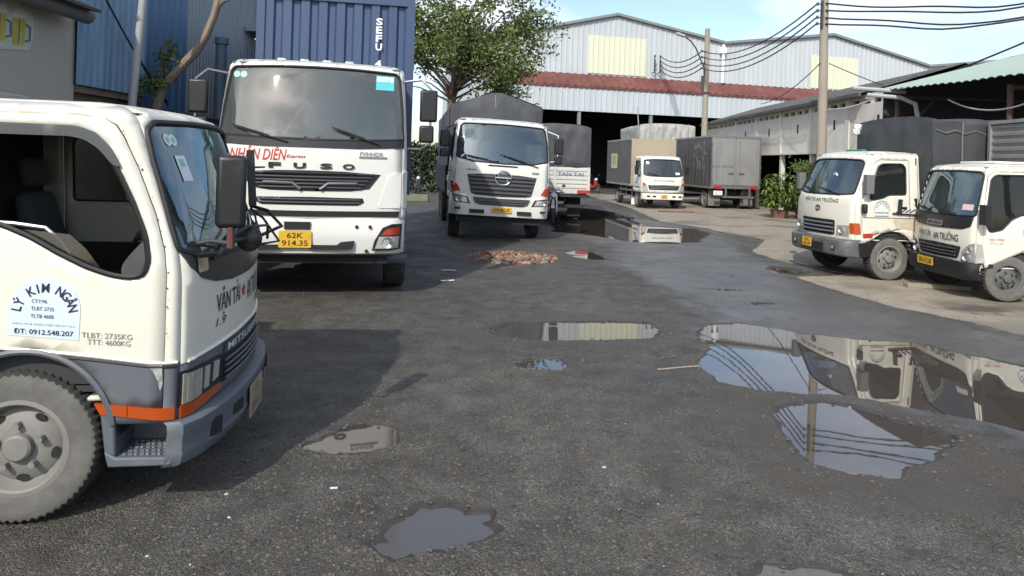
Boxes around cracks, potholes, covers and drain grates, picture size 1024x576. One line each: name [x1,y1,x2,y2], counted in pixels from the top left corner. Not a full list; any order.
pothole [515,357,568,371]
pothole [695,322,1024,432]
pothole [736,558,869,576]
pothole [769,400,961,479]
pothole [469,250,558,265]
pothole [766,266,812,275]
pothole [362,497,505,562]
pothole [566,249,609,260]
pothole [484,320,663,341]
pothole [301,422,400,455]
pothole [549,207,714,244]
